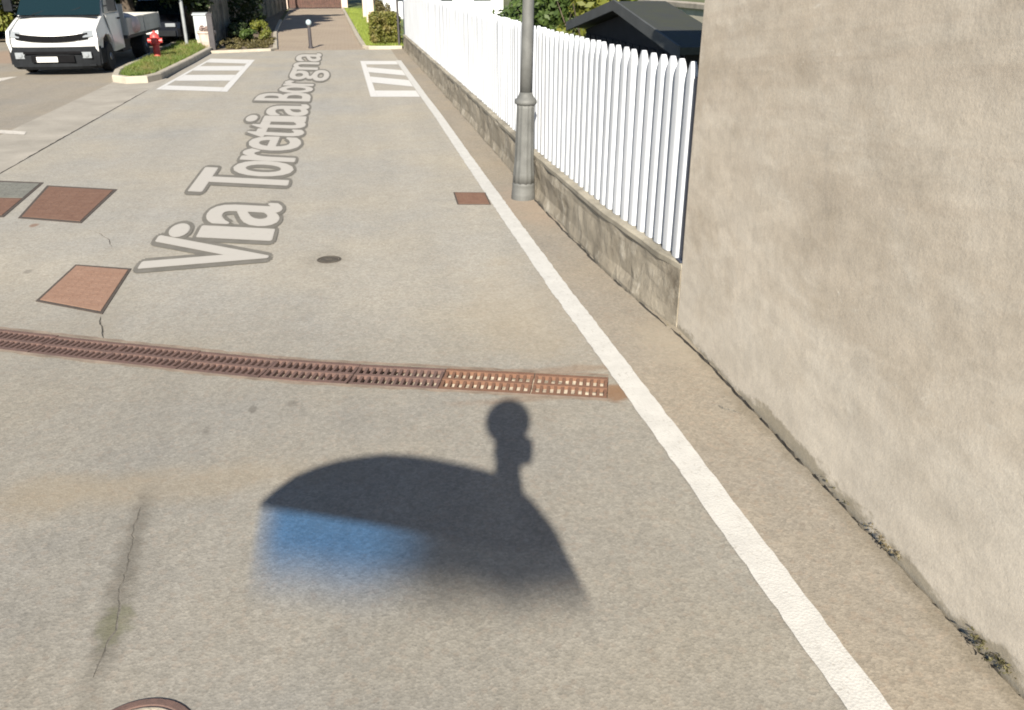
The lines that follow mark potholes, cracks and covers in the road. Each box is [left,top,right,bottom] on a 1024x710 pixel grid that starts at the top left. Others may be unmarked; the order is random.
crack [93,507,141,677]
manhole cover [18,185,117,223]
manhole cover [0,181,44,217]
manhole cover [35,264,131,314]
manhole cover [453,192,491,205]
manhole cover [113,698,190,710]
